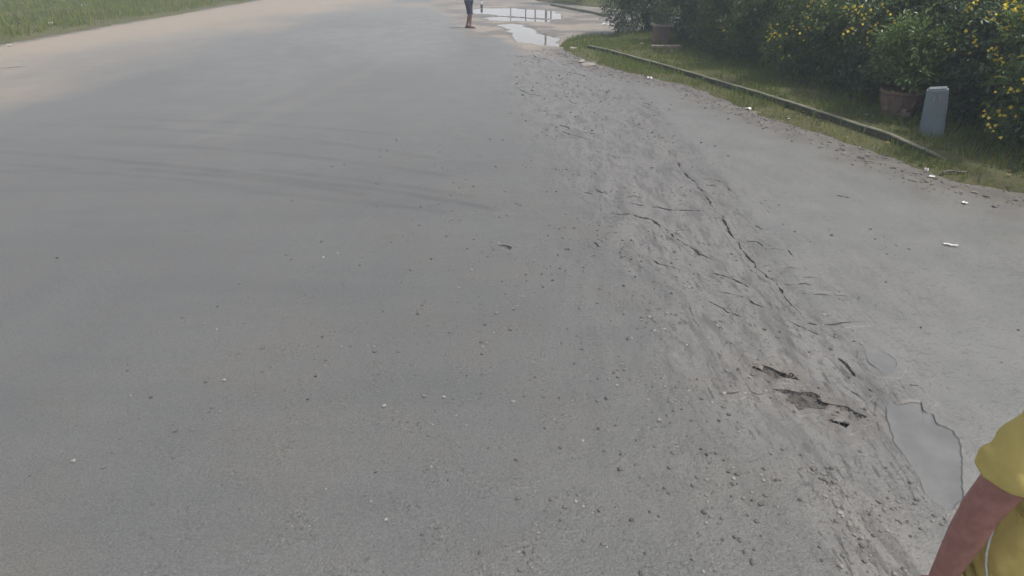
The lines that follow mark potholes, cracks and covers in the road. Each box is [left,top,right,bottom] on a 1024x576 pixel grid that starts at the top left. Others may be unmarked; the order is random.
pothole [816,405,861,436]
pothole [740,356,810,386]
pothole [761,384,877,427]
crack [573,150,941,406]
